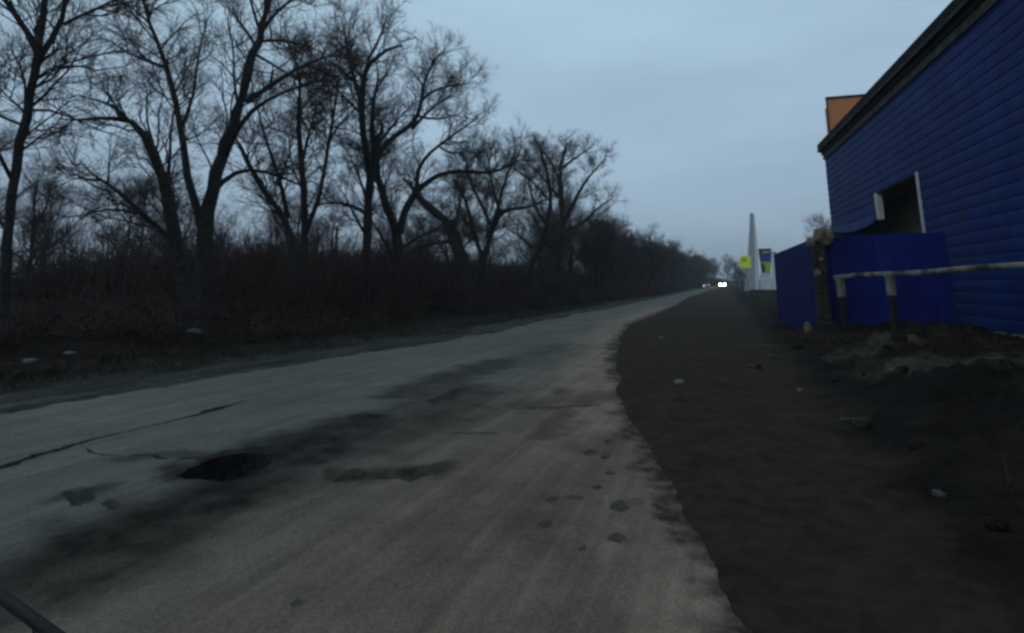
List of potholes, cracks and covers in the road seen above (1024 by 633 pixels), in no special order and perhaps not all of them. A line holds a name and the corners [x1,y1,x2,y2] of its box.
pothole [60,487,96,507]
pothole [177,452,273,482]
pothole [606,532,626,543]
crack [0,400,248,469]
pothole [609,500,631,512]
pothole [332,466,430,483]
